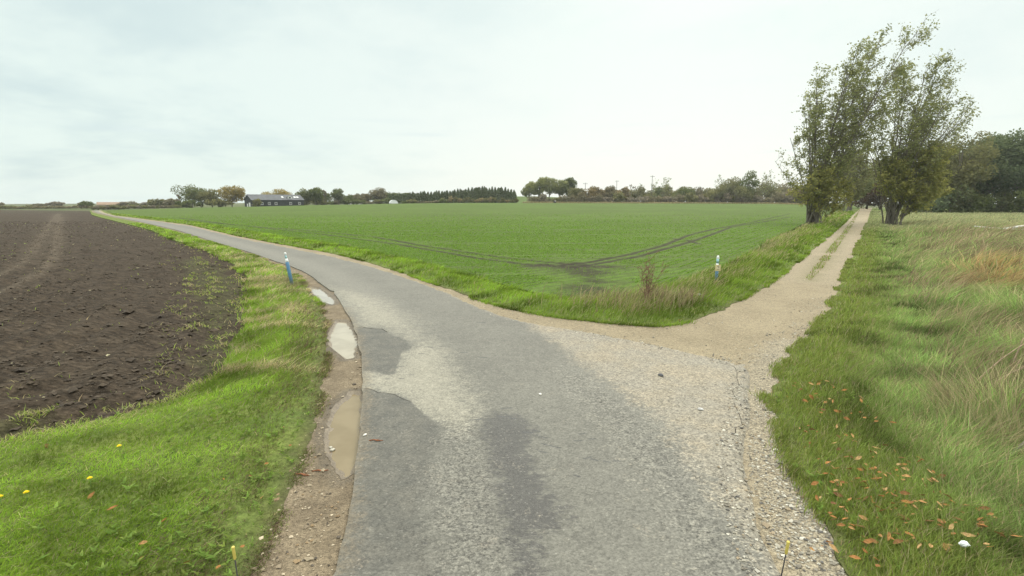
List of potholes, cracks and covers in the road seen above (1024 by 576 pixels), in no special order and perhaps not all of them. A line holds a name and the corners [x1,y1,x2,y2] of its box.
pothole [309,287,337,305]
pothole [323,391,363,480]
pothole [327,320,358,360]
